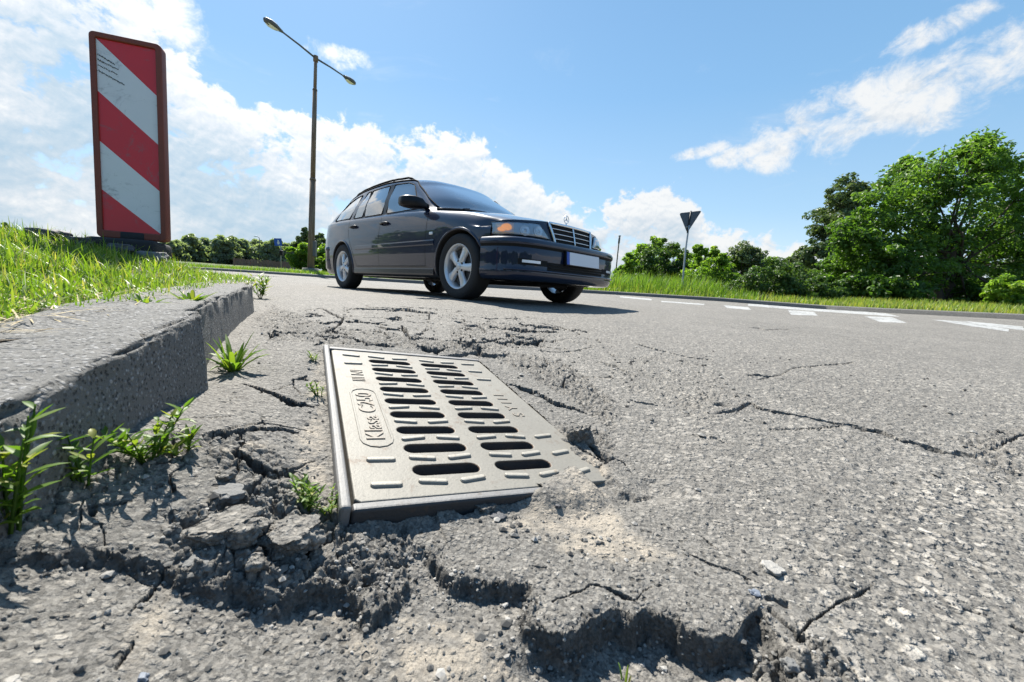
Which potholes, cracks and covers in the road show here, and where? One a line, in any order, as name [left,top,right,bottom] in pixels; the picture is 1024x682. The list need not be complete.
pothole [178,516,200,530]
crack [269,307,592,414]
crack [750,402,950,454]
pothole [215,484,261,512]
crack [796,588,871,642]
pothole [170,557,377,634]
pothole [532,601,784,682]
pothole [394,521,537,632]
pothole [386,560,408,569]
